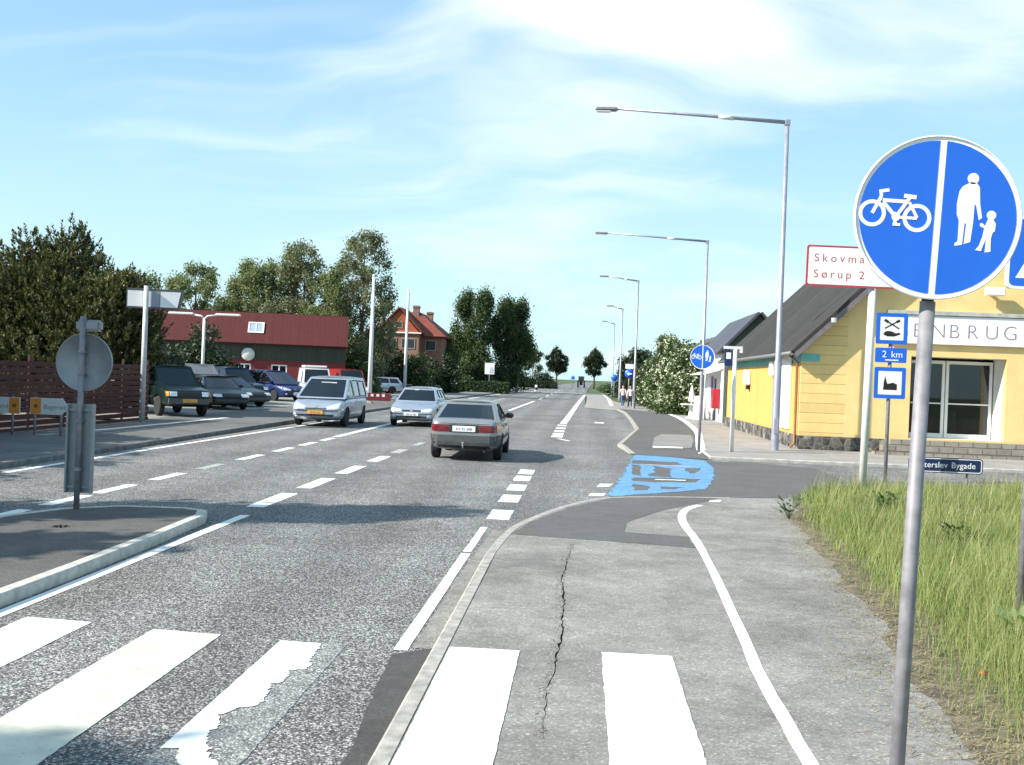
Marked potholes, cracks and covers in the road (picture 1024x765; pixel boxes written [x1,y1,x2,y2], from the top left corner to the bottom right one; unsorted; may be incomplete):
crack [526,544,574,739]
